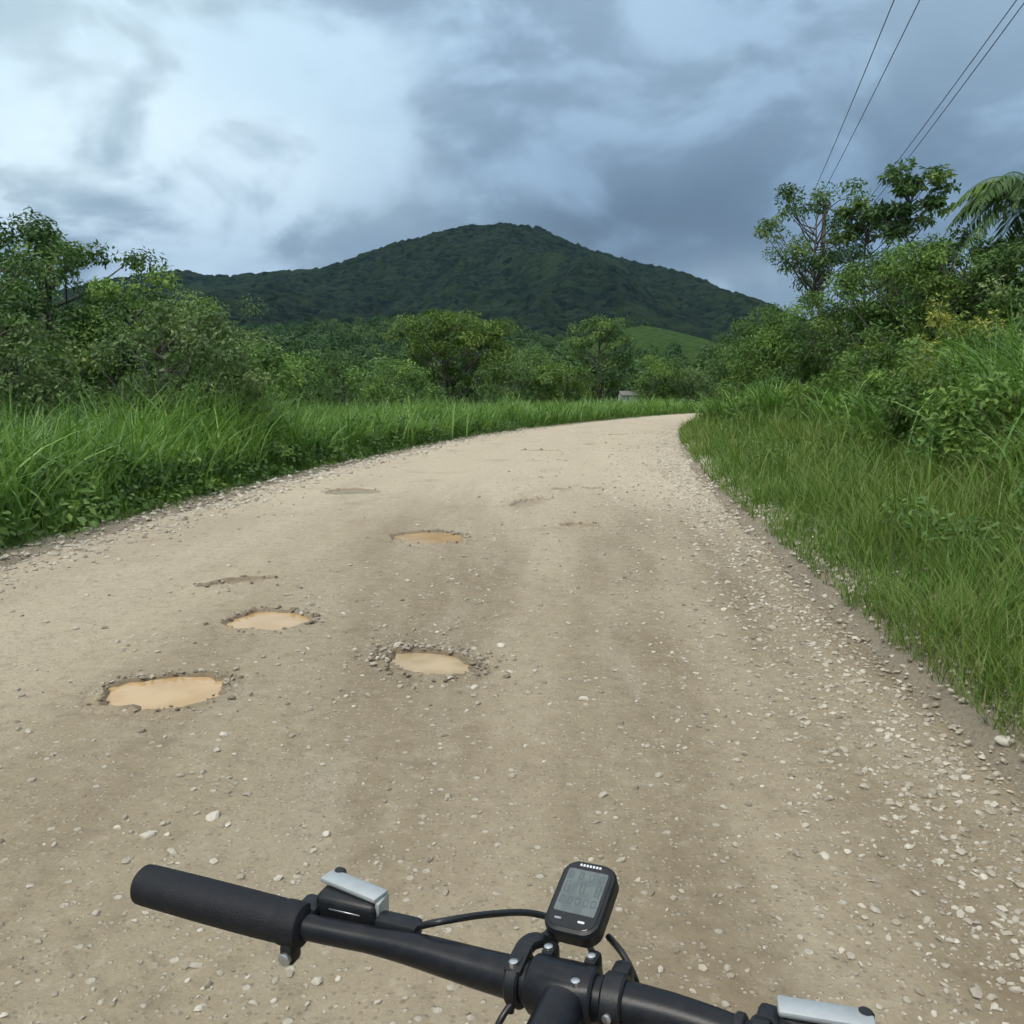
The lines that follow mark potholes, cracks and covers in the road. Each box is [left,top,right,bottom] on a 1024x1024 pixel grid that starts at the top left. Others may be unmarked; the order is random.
pothole [554,521,604,529]
pothole [314,486,391,497]
pothole [74,664,253,720]
pothole [174,575,286,593]
pothole [203,605,338,636]
pothole [502,496,556,509]
pothole [366,529,478,548]
